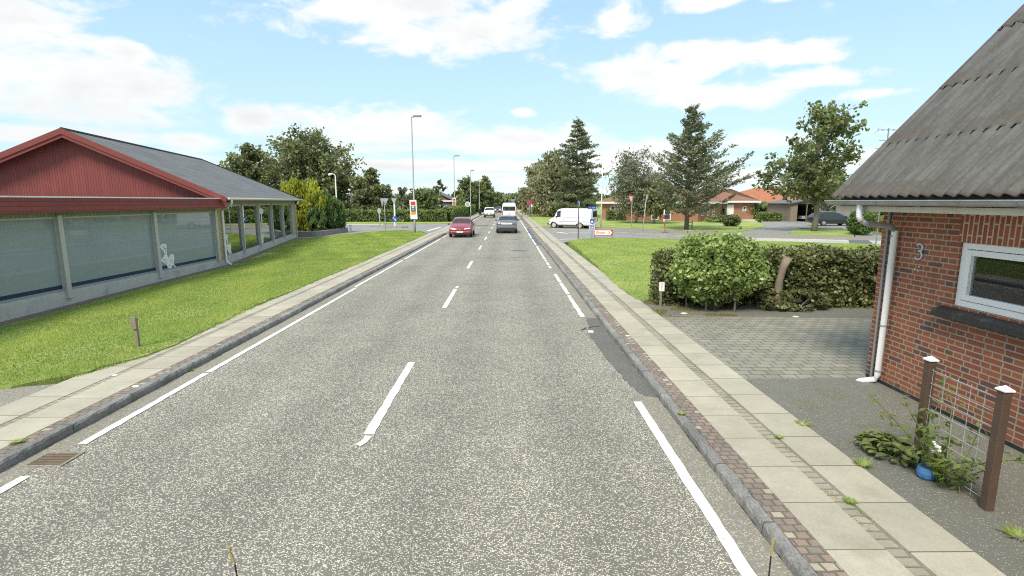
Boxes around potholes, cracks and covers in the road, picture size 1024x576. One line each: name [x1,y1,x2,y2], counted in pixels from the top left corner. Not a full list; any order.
drain grate [21,452,85,467]
